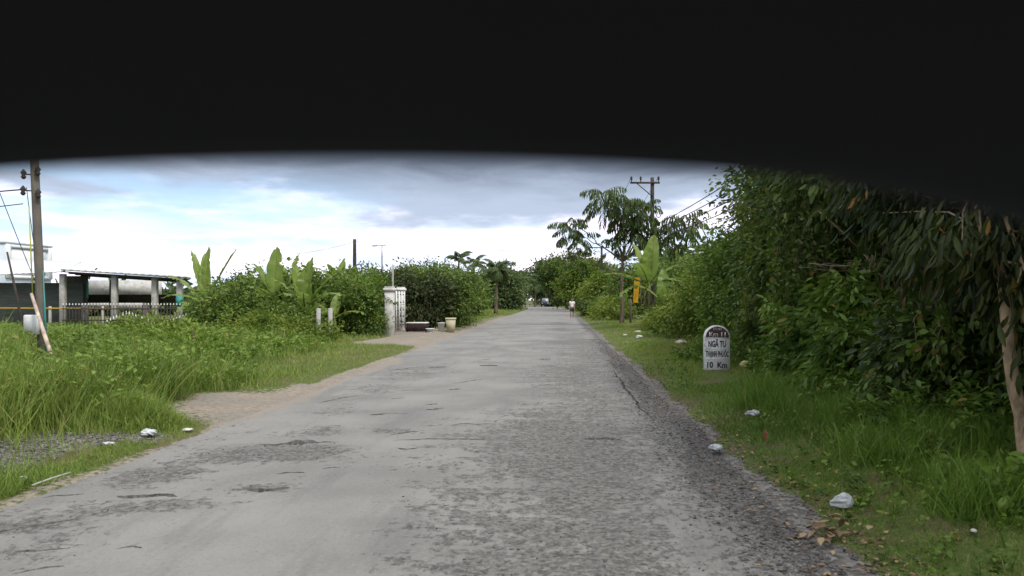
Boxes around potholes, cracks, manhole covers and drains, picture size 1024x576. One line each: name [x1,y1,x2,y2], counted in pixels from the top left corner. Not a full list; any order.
crack [614,371,653,419]
